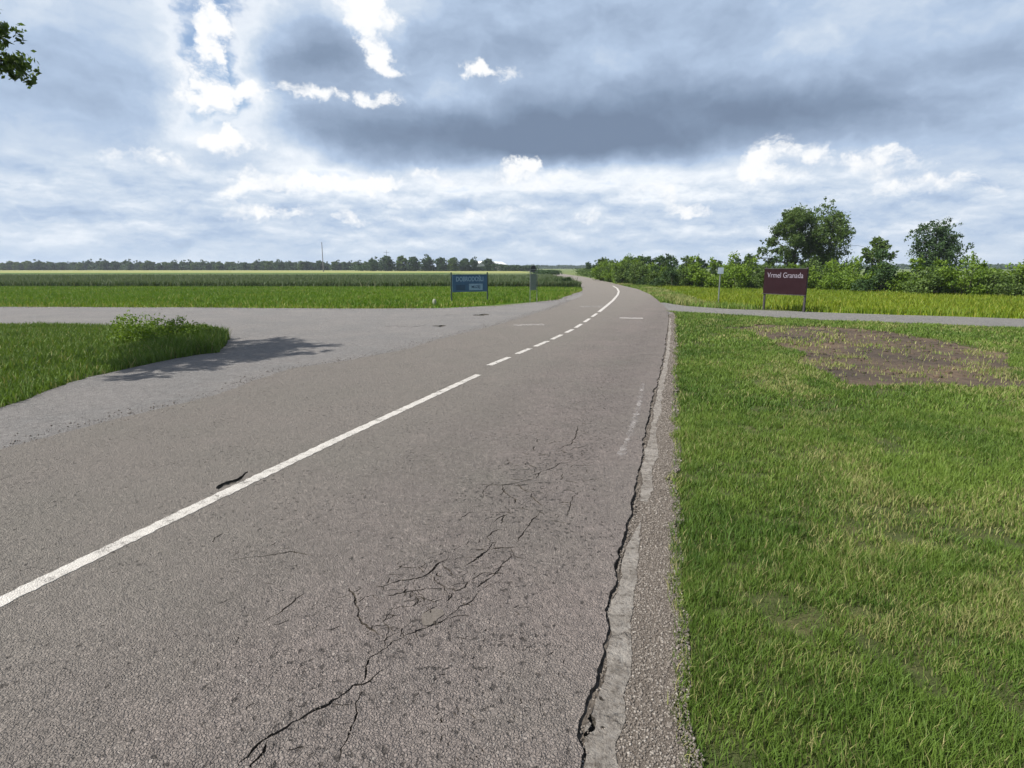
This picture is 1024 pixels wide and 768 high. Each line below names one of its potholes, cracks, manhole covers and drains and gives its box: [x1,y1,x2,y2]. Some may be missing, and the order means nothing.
crack [212,327,668,768]
